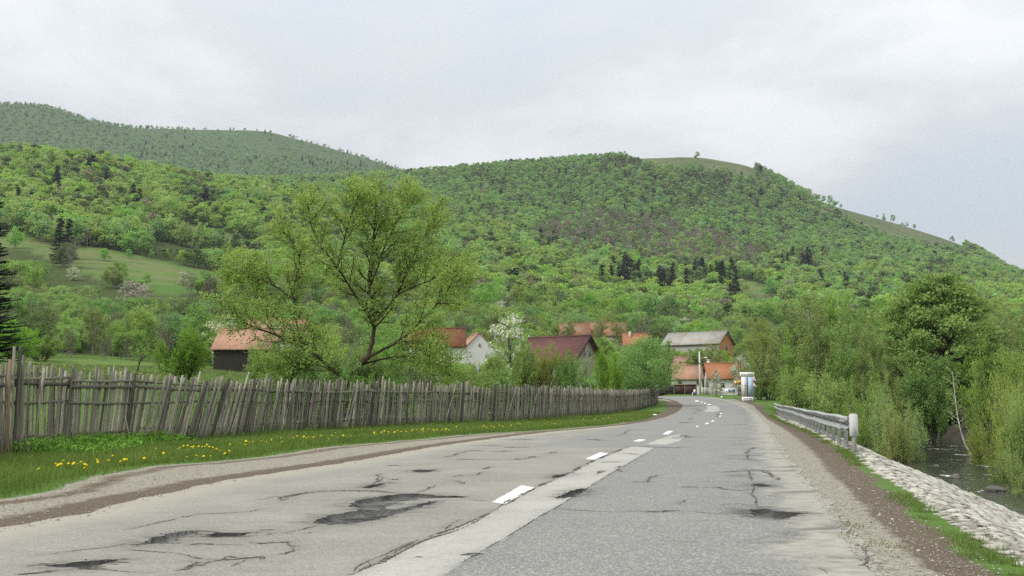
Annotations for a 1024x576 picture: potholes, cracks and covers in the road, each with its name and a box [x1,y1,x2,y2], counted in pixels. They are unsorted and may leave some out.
pothole [125,530,209,546]
pothole [738,508,814,520]
crack [353,519,484,572]
crack [21,465,400,574]
pothole [309,494,464,525]
crack [568,447,779,514]
crack [418,439,555,501]
pothole [554,488,592,499]
pothole [27,558,141,569]
